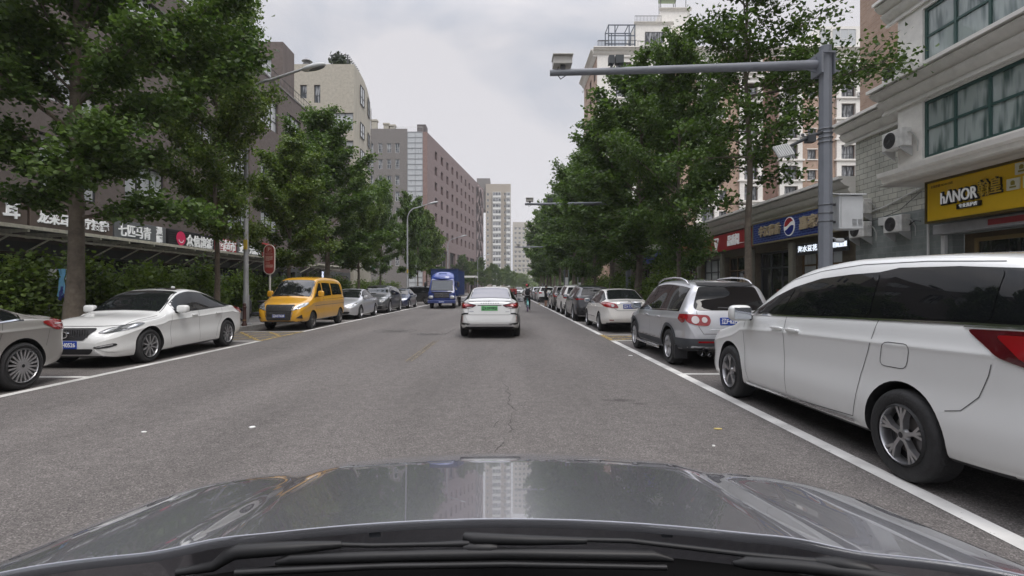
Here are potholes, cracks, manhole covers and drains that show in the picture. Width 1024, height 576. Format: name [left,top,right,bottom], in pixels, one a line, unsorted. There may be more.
crack [494,384,517,452]
